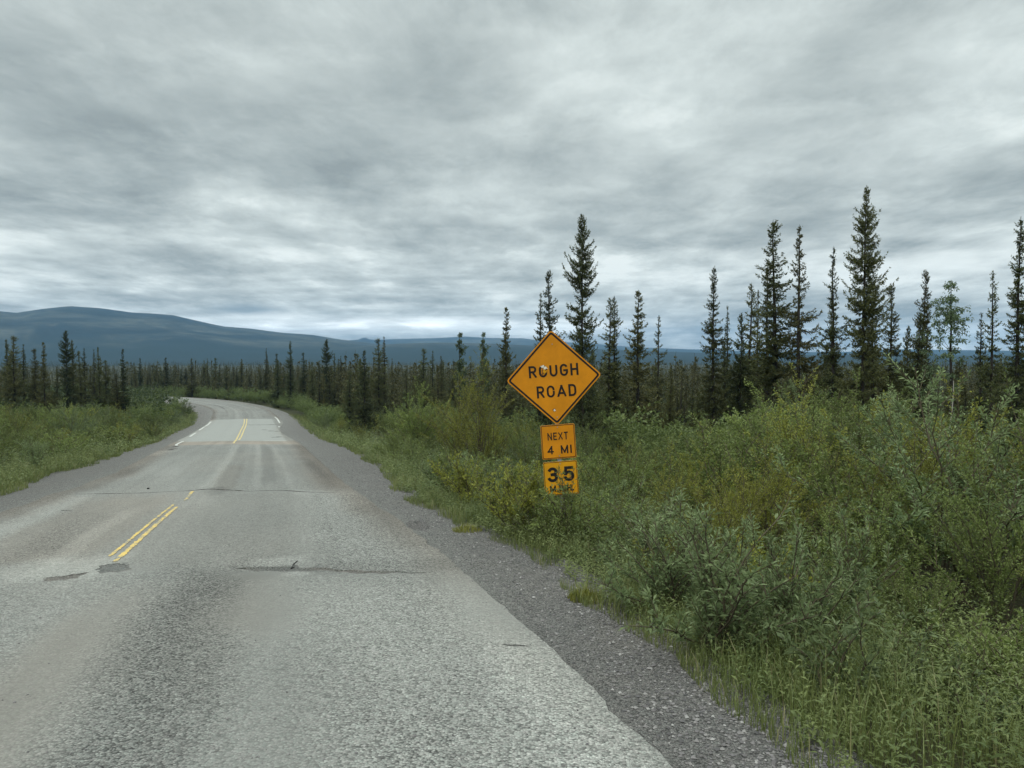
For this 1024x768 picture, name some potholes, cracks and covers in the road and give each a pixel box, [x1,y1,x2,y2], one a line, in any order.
crack [235,560,430,574]
pothole [95,563,131,574]
pothole [43,572,89,582]
